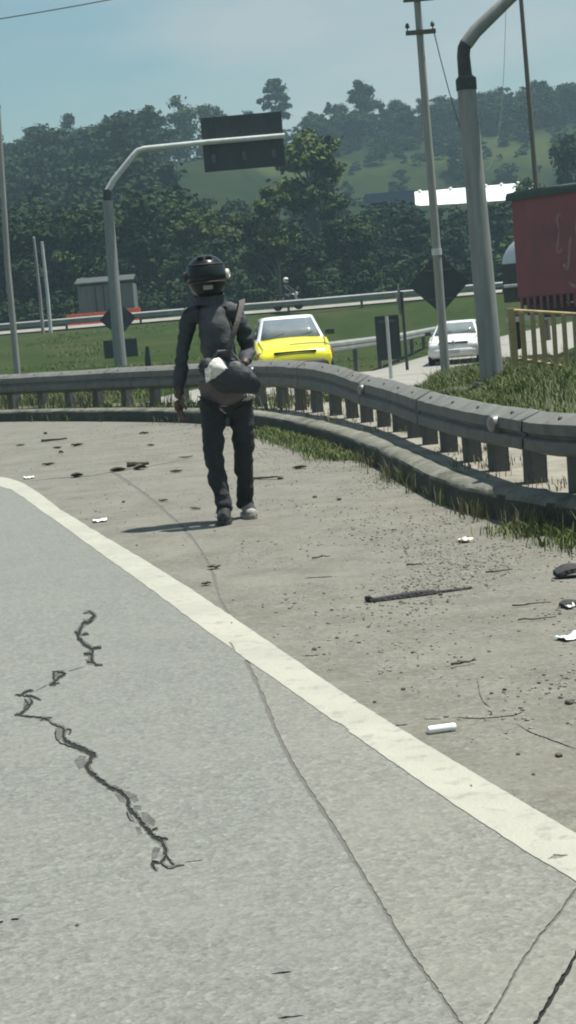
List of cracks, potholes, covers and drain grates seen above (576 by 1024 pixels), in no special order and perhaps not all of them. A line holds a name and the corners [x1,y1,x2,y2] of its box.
crack [14,610,201,872]
crack [484,888,576,1024]
